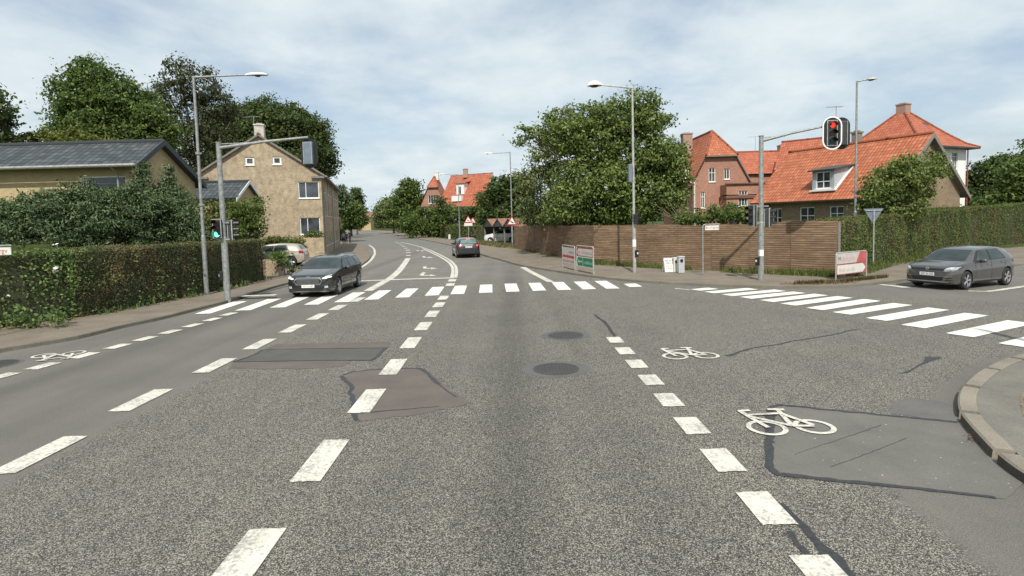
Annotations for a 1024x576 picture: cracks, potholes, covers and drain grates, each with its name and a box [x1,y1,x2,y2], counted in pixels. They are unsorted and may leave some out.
manhole cover [542,331,590,340]
manhole cover [522,361,591,377]
